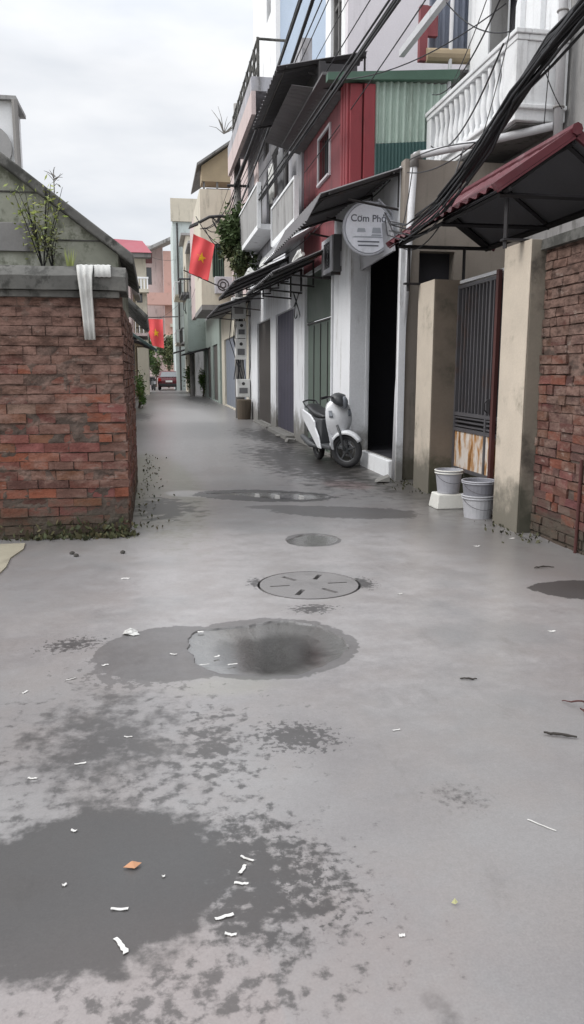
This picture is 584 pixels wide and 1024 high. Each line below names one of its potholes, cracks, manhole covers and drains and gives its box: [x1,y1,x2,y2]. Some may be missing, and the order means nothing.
manhole cover [259,572,359,599]
pothole [187,620,349,677]
